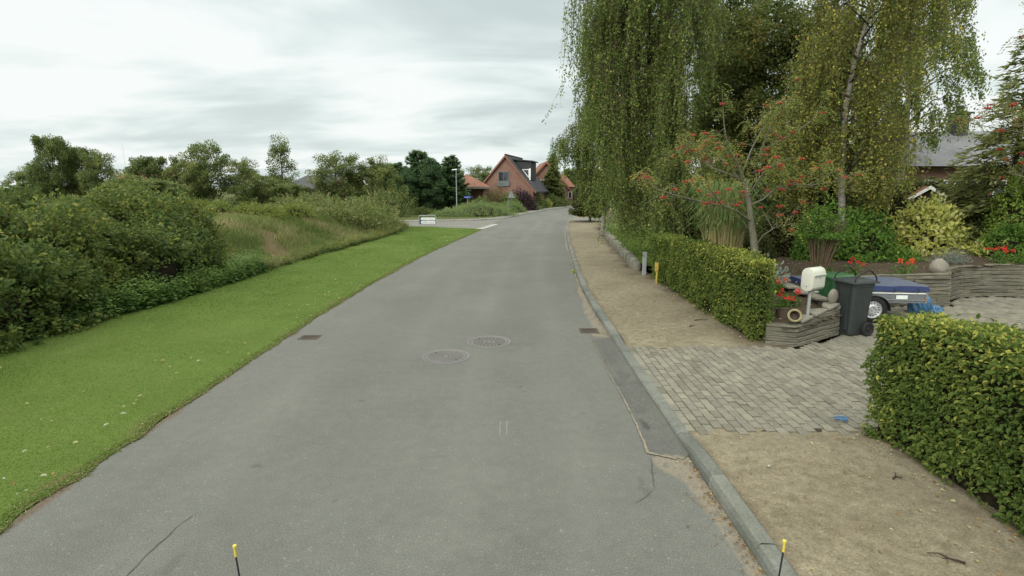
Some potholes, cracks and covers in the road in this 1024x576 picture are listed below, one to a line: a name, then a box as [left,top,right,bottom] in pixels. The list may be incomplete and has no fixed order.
manhole cover [467,336,511,348]
manhole cover [421,349,470,364]
crack [126,514,195,576]
crack [592,338,677,502]
